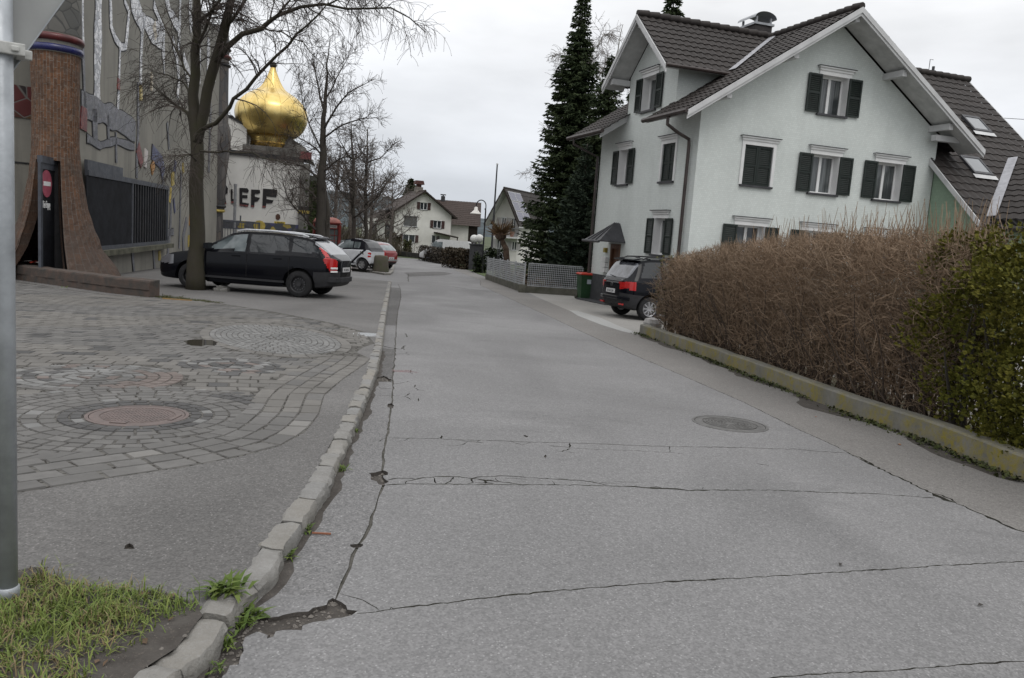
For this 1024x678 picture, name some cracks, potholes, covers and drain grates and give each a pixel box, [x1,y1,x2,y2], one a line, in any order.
manhole cover [692,415,769,433]
crack [335,284,1024,614]
manhole cover [84,405,189,427]
pothole [369,470,388,485]
pothole [204,598,357,678]
crack [771,661,1024,678]
